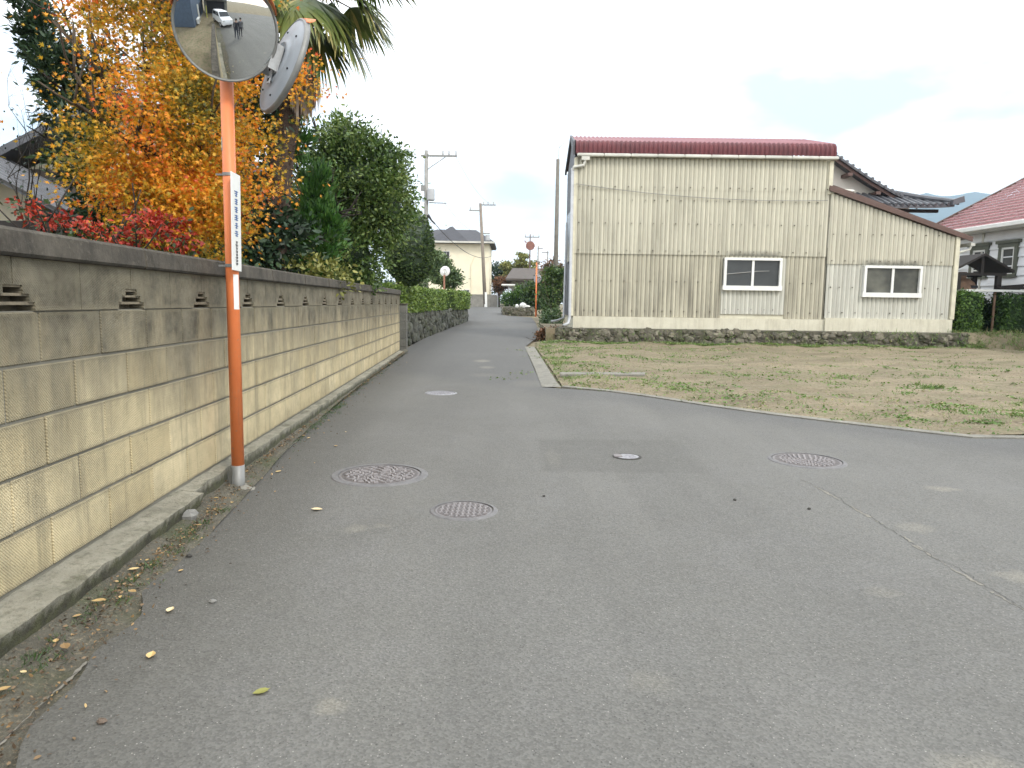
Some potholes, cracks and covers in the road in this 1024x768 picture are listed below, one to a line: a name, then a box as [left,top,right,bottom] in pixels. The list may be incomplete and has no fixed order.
crack [805,481,1024,610]
manhole cover [767,452,848,469]
manhole cover [429,500,498,521]
manhole cover [331,464,428,487]
